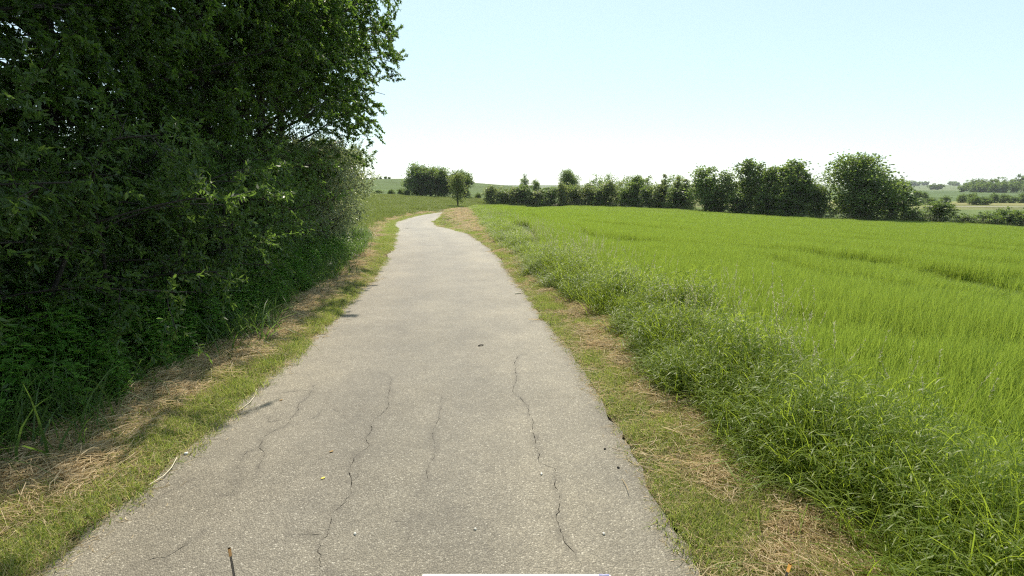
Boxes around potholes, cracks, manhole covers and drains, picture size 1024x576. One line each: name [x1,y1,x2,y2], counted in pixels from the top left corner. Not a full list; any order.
crack [295,379,392,568]
crack [512,358,582,565]
